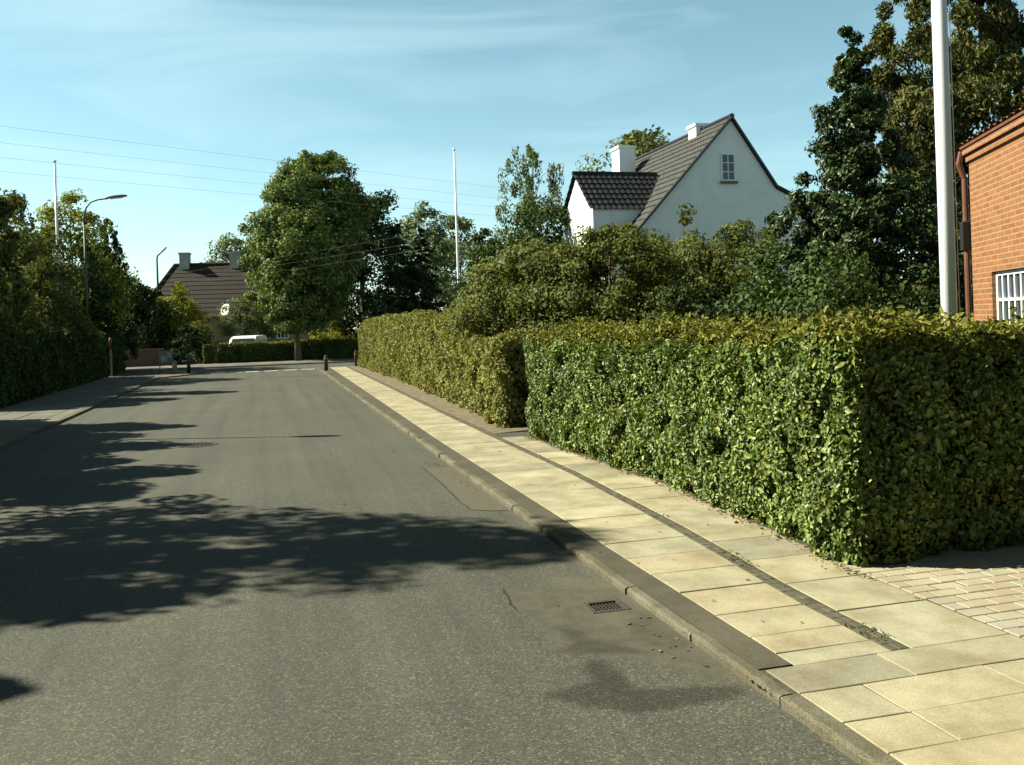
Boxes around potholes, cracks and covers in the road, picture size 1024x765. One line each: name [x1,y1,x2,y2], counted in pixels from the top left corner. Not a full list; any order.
drain grate [581,598,632,614]
